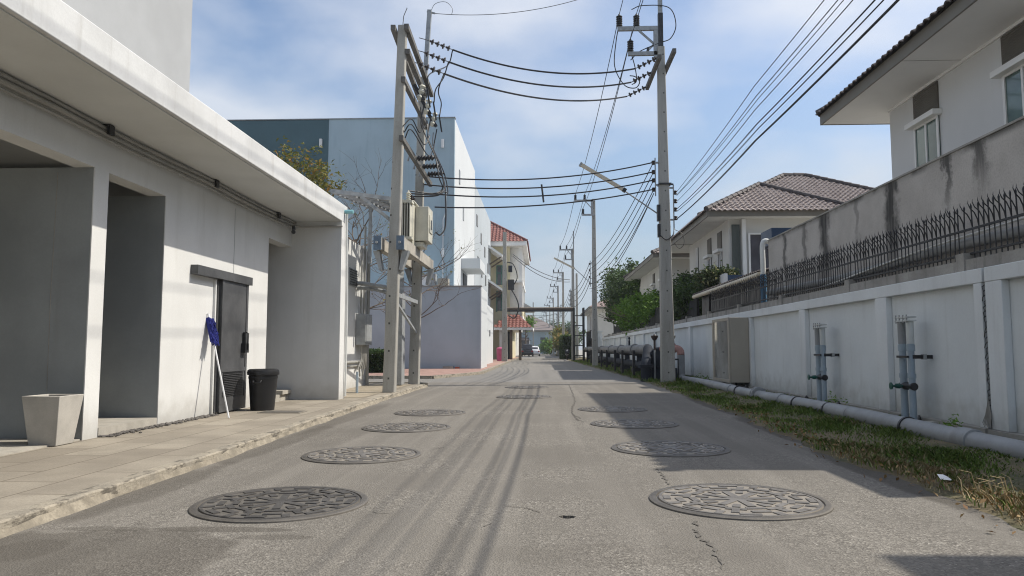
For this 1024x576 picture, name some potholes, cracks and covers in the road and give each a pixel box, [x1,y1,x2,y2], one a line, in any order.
manhole cover [649,483,834,521]
manhole cover [590,419,679,429]
manhole cover [301,446,421,464]
manhole cover [188,486,369,524]
crack [693,521,725,569]
manhole cover [611,440,731,457]
manhole cover [362,423,451,433]
